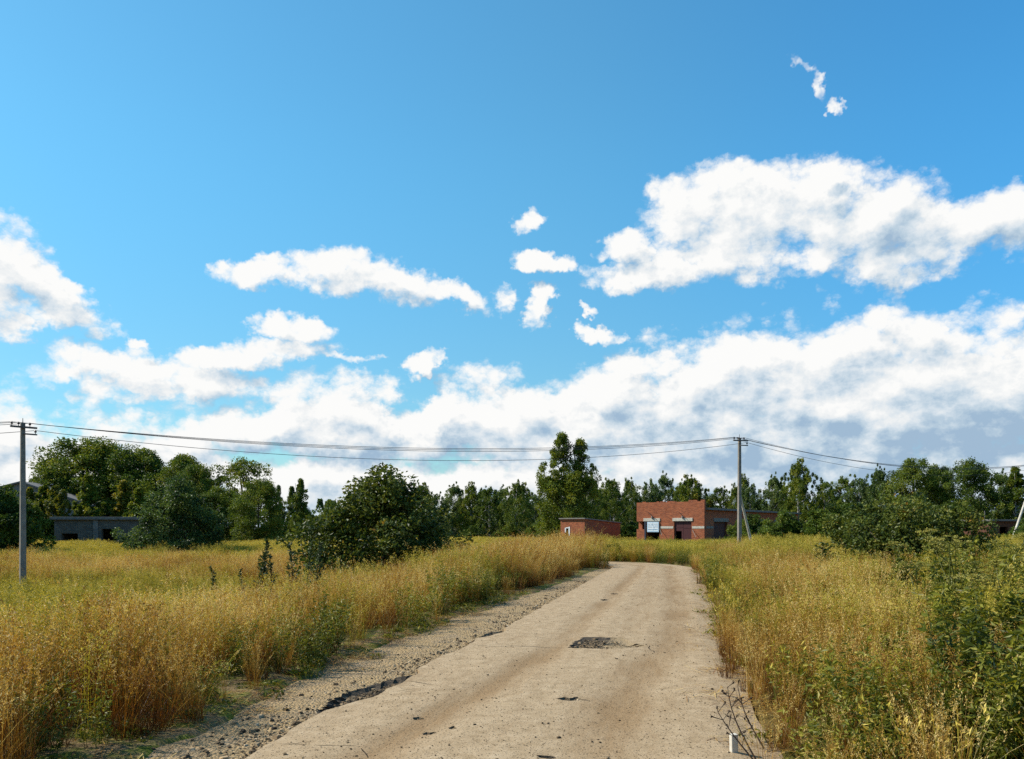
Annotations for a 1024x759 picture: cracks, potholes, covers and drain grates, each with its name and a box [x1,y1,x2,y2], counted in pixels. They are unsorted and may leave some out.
pothole [316,675,413,714]
pothole [568,637,646,649]
